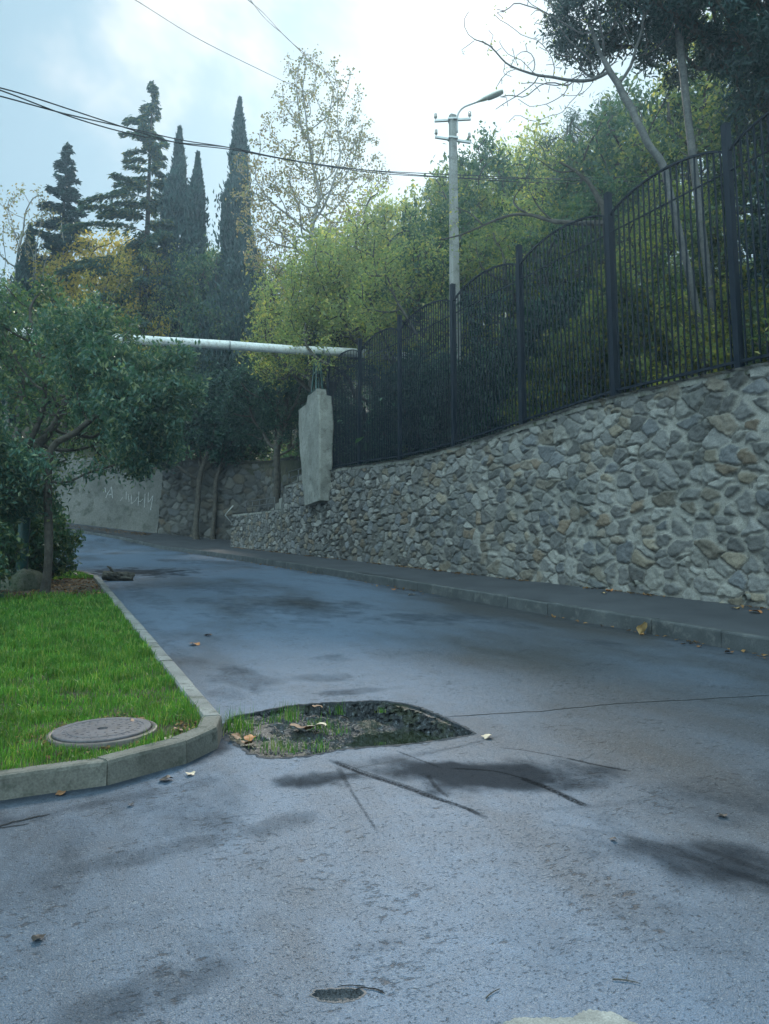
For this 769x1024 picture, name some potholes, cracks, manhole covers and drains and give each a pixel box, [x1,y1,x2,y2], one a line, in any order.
manhole cover [44,717,158,750]
crack [450,695,769,717]
pothole [309,987,367,1003]
crack [0,814,49,828]
pothole [222,700,477,759]
